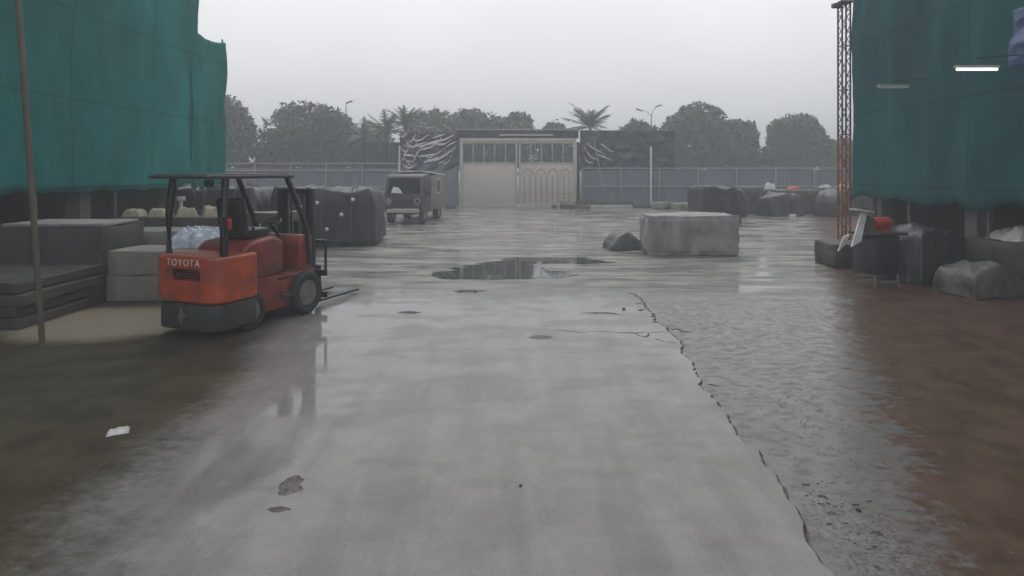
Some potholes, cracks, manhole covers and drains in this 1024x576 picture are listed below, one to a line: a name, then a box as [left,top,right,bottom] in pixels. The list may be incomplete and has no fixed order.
pothole [277,475,305,496]
crack [559,293,902,576]
